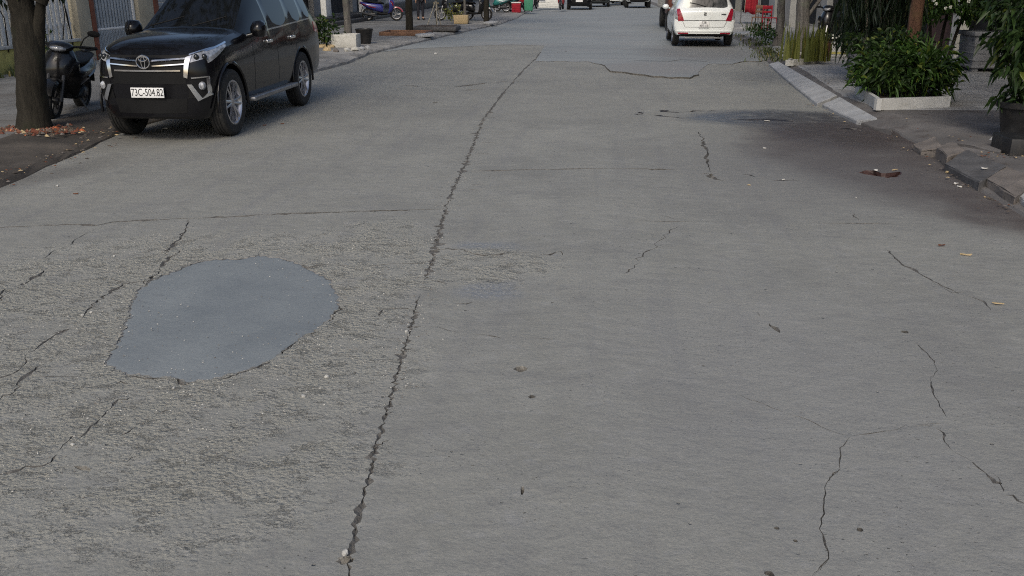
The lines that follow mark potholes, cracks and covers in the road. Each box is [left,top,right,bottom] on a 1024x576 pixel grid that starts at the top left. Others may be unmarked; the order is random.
crack [740,342,1023,576]
crack [888,250,991,310]
crack [0,221,189,399]
crack [694,132,723,181]
crack [0,307,409,475]
crack [302,243,563,268]
crack [624,214,689,274]
